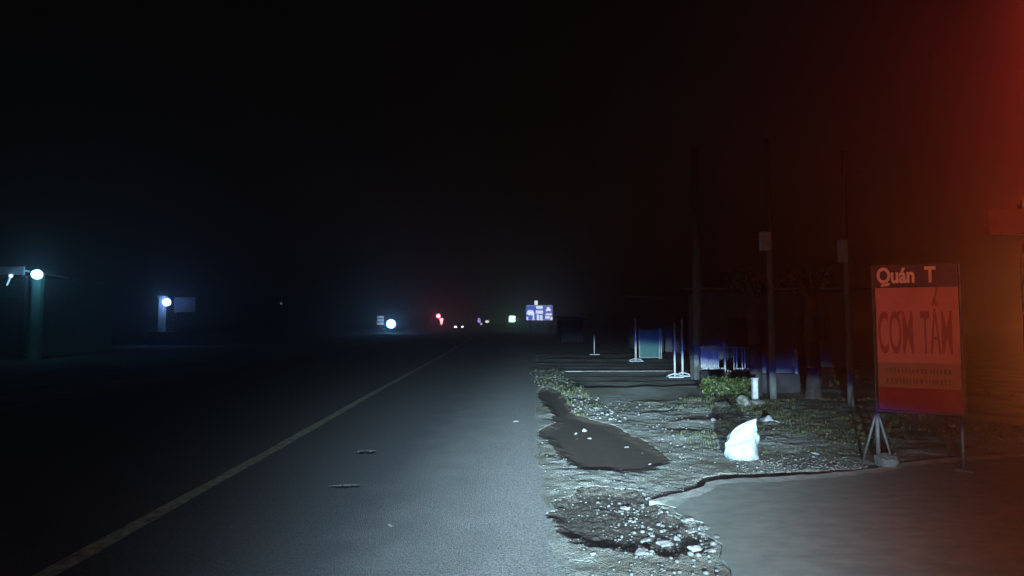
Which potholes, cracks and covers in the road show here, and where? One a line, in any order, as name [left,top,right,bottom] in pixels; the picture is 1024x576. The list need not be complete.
pothole [546,486,706,557]
